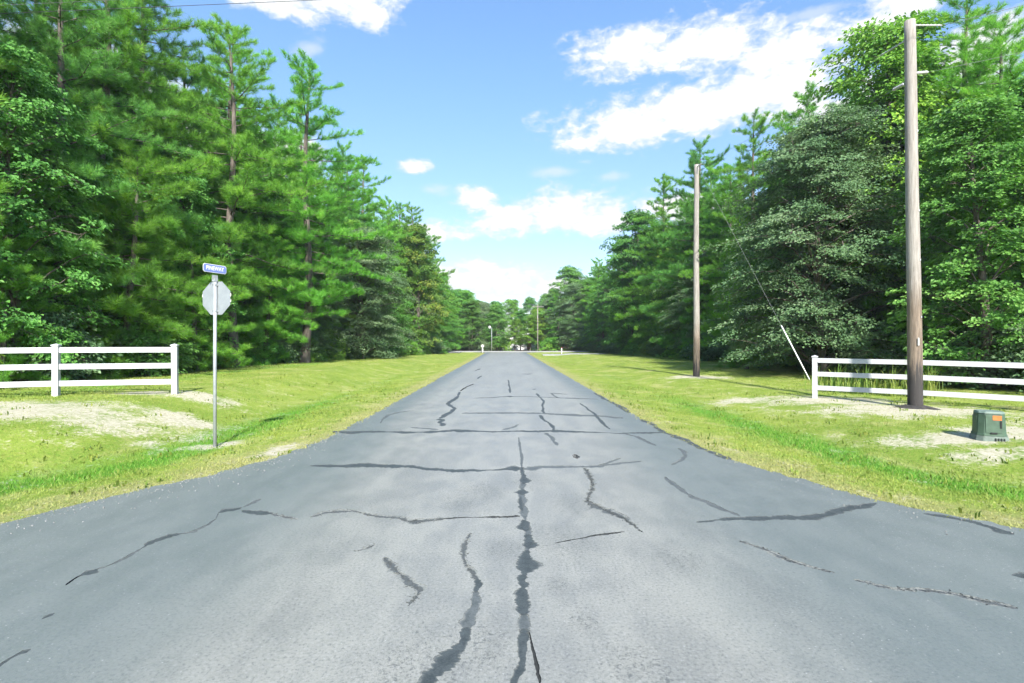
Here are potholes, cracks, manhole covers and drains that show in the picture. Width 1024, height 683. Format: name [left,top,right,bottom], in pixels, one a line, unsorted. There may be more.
crack [0,369,731,683]
crack [739,541,1018,609]
